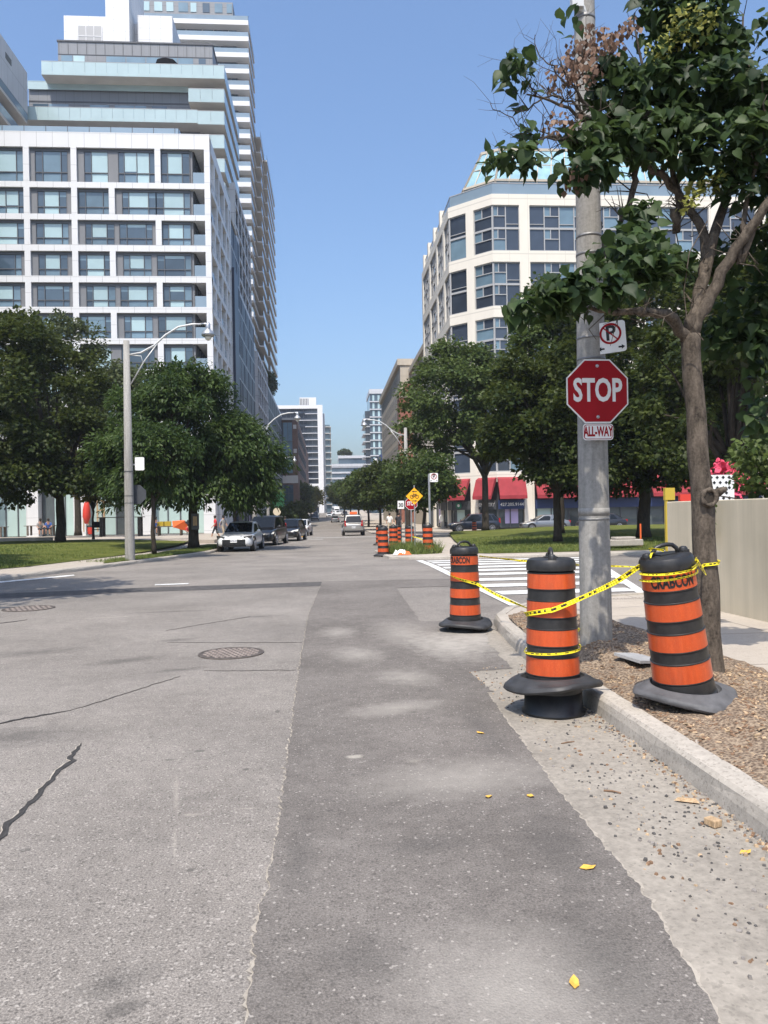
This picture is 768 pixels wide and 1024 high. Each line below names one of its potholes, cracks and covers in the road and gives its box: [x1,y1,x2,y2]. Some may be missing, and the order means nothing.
crack [0,676,179,724]
manhole cover [198,647,264,660]
crack [0,743,81,839]
